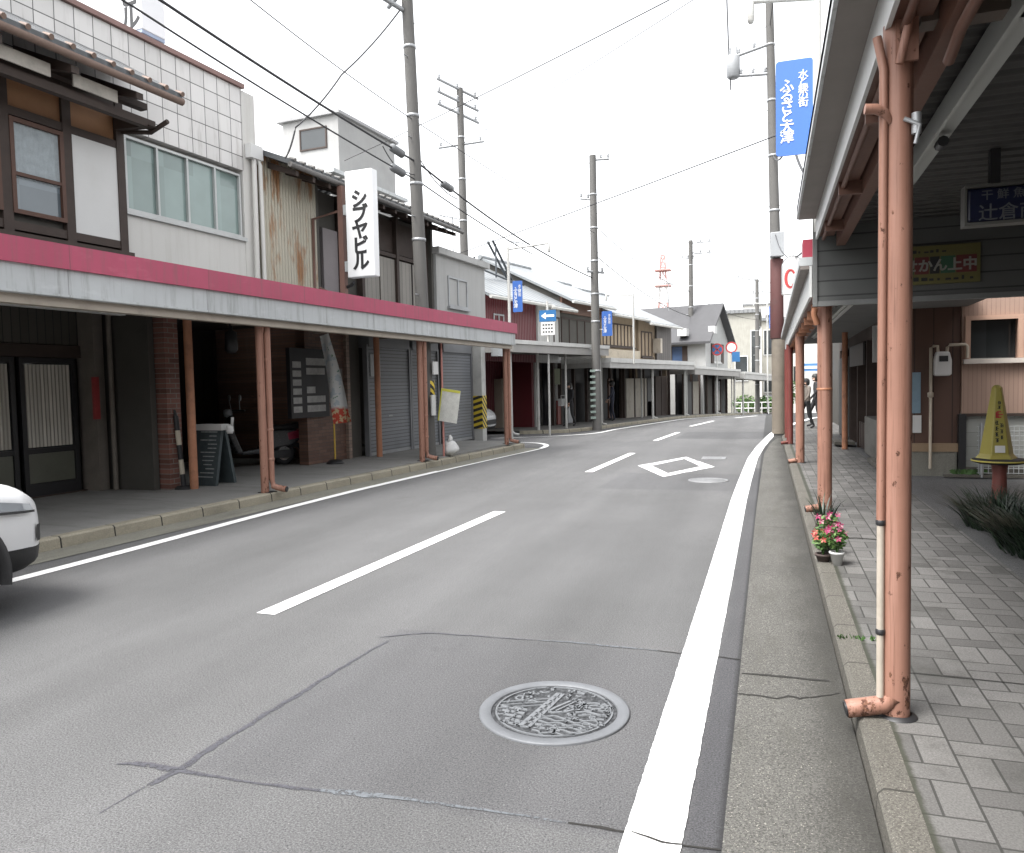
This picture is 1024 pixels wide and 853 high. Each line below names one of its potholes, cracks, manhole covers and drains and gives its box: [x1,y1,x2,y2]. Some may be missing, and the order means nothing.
crack [738,673,840,699]
manhole cover [479,681,630,746]
